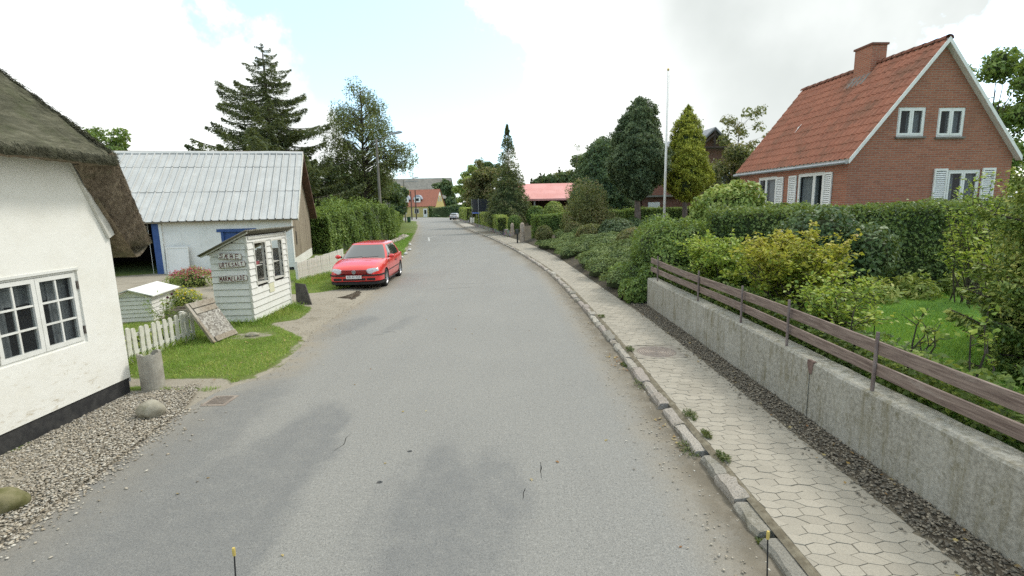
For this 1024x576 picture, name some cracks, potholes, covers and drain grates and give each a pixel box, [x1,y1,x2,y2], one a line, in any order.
manhole cover [628,345,687,359]
drain grate [200,395,239,406]
